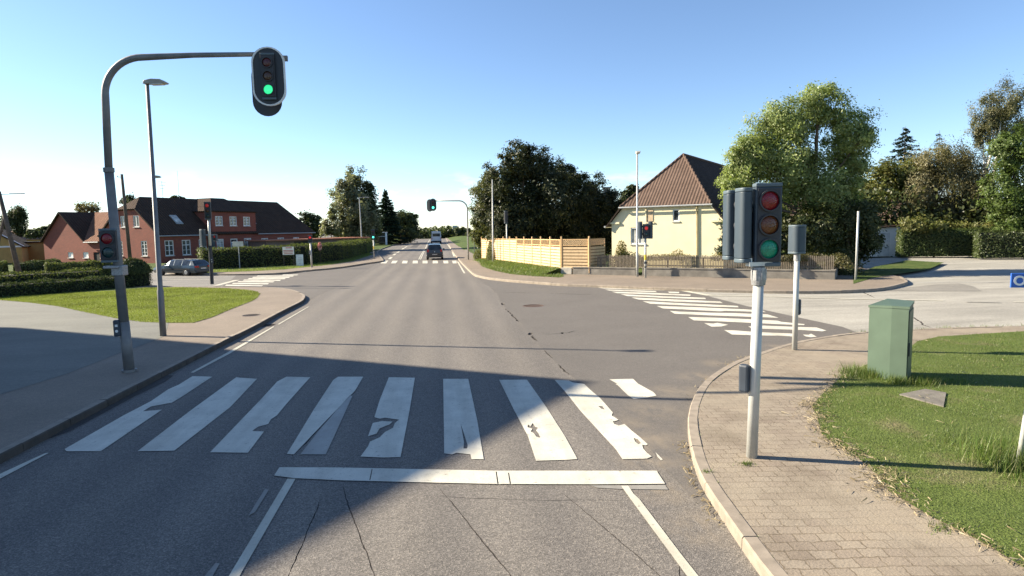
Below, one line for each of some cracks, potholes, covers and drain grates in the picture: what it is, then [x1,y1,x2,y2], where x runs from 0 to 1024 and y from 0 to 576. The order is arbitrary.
crack [288,500,320,576]
crack [412,489,660,576]
crack [343,487,375,576]
